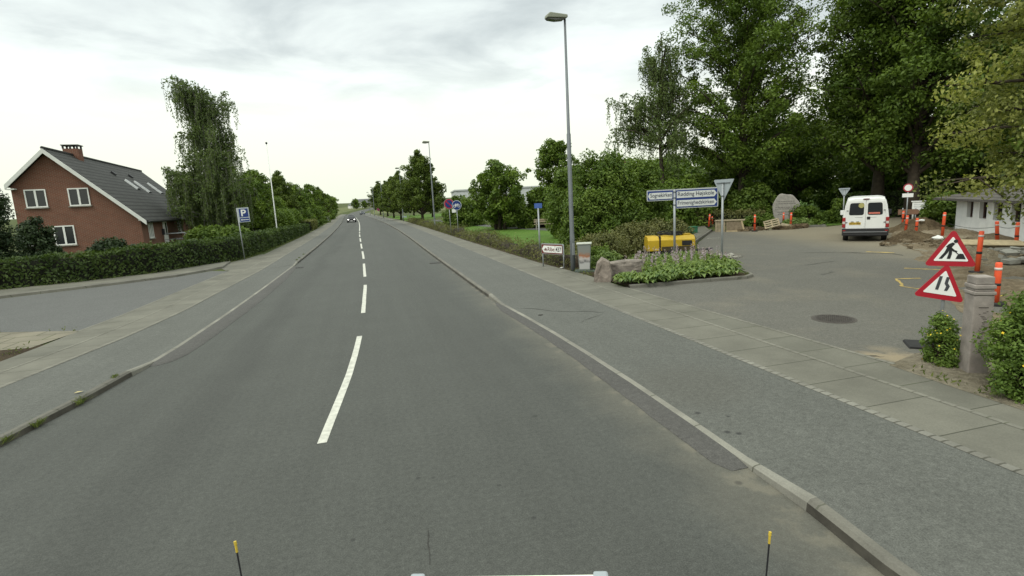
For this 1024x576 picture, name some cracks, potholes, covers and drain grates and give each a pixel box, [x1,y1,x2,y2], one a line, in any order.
manhole cover [811,314,857,324]
